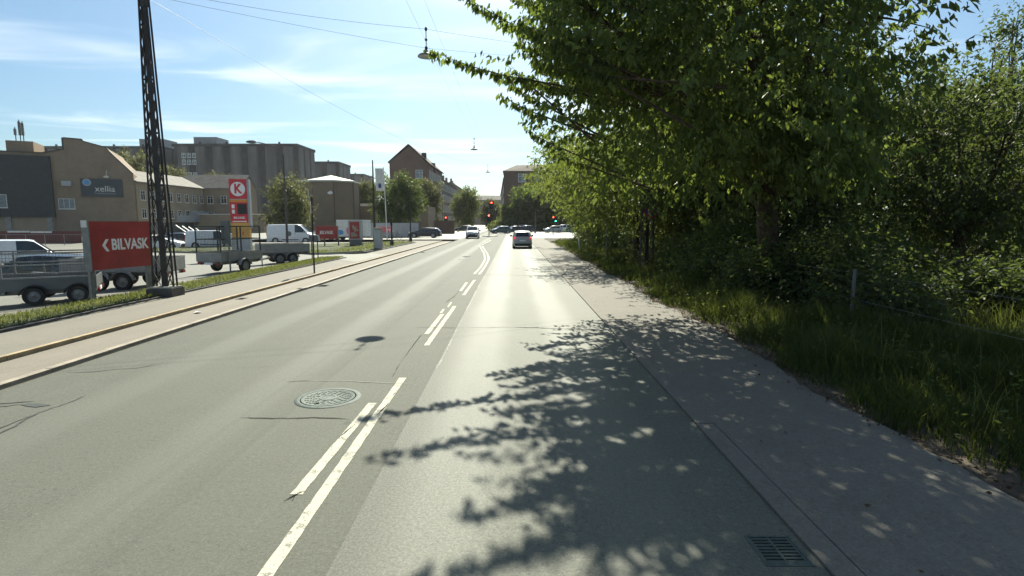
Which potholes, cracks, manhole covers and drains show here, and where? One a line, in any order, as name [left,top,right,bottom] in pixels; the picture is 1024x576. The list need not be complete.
crack [0,396,82,433]
drain grate [744,536,815,567]
manhole cover [294,388,362,409]
crack [291,338,419,415]
